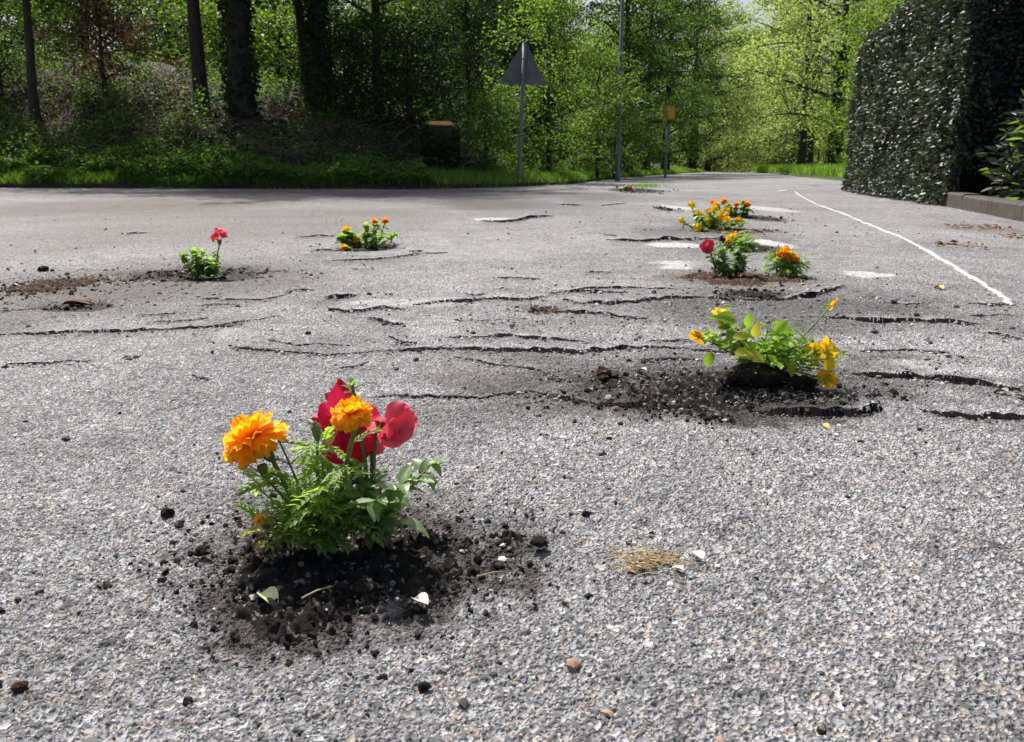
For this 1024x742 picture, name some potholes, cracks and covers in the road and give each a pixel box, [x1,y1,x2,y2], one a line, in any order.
crack [3,271,1023,412]
crack [483,204,581,223]
pothole [314,342,1013,499]
pothole [0,266,198,318]
pothole [296,241,414,257]
pothole [0,428,877,736]
pothole [61,259,390,294]
